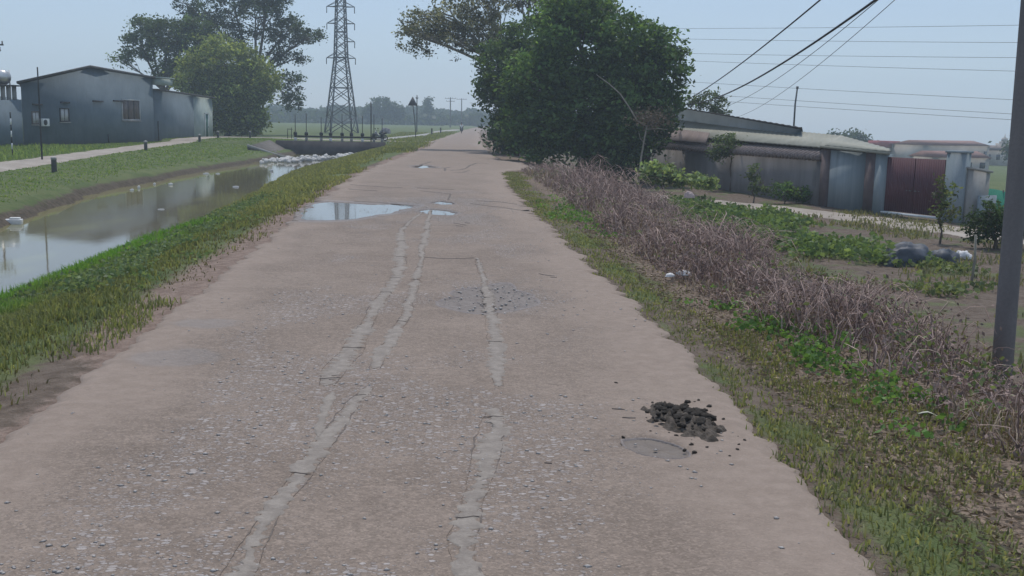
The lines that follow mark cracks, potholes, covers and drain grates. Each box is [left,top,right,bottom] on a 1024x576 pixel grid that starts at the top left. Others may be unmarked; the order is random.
pothole [295,201,418,221]
pothole [435,282,541,315]
